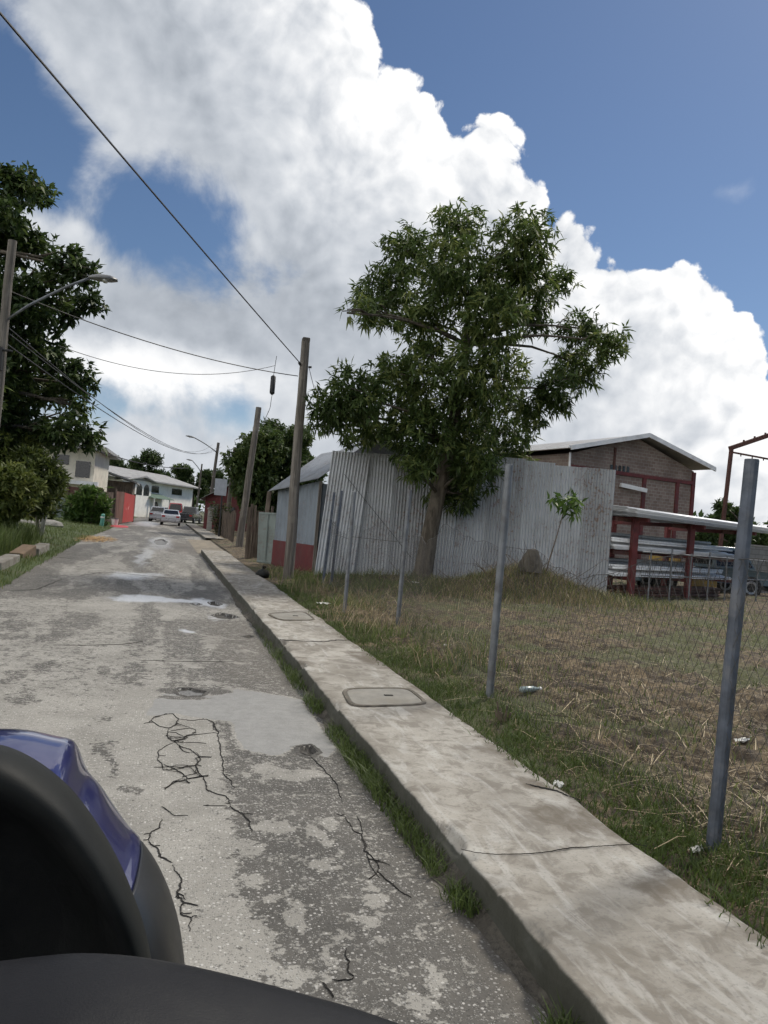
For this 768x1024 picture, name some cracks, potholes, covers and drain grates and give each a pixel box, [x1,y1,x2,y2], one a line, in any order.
manhole cover [342,687,426,707]
crack [322,948,354,998]
crack [461,844,647,855]
pothole [294,744,323,759]
pothole [172,687,211,697]
crack [143,713,253,931]
manhole cover [268,611,315,621]
crack [311,757,412,898]
crack [526,783,580,800]
